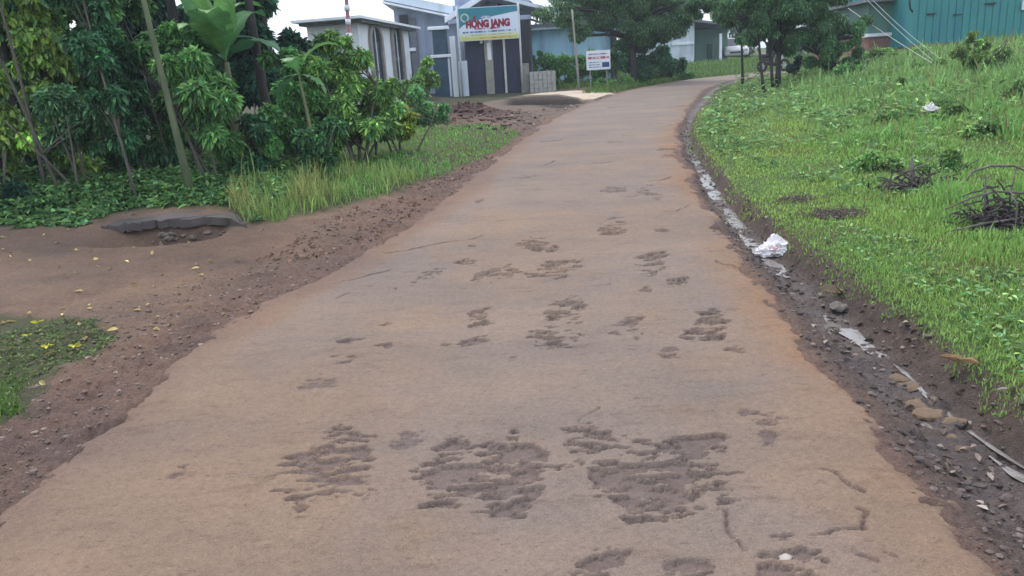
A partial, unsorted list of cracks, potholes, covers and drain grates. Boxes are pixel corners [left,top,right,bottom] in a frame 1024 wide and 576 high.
crack [329,233,489,301]
crack [717,465,909,564]
pothole [394,428,562,525]
pothole [539,293,596,325]
pothole [497,234,569,254]
pothole [516,258,592,283]
pothole [669,307,742,347]
pothole [449,304,505,330]
pothole [514,322,589,353]
pothole [256,422,387,520]
pothole [629,246,682,279]
pothole [564,544,641,576]
